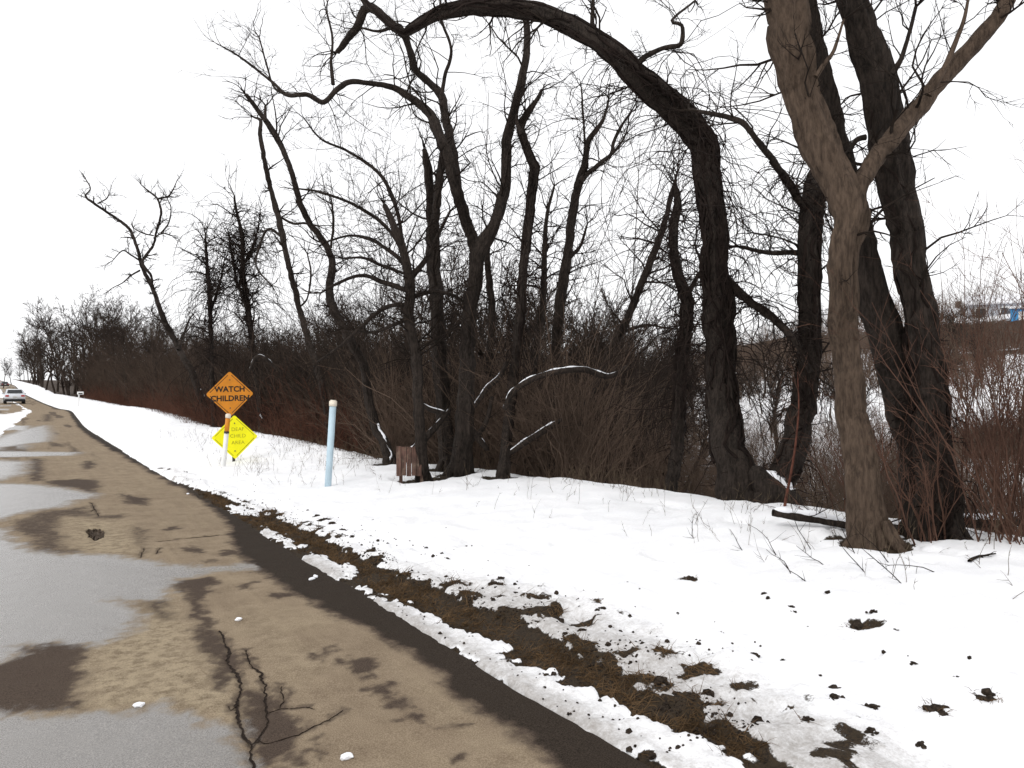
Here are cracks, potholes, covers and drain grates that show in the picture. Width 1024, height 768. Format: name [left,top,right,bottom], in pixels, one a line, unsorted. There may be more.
crack [219,631,343,768]
pothole [86,529,104,541]
